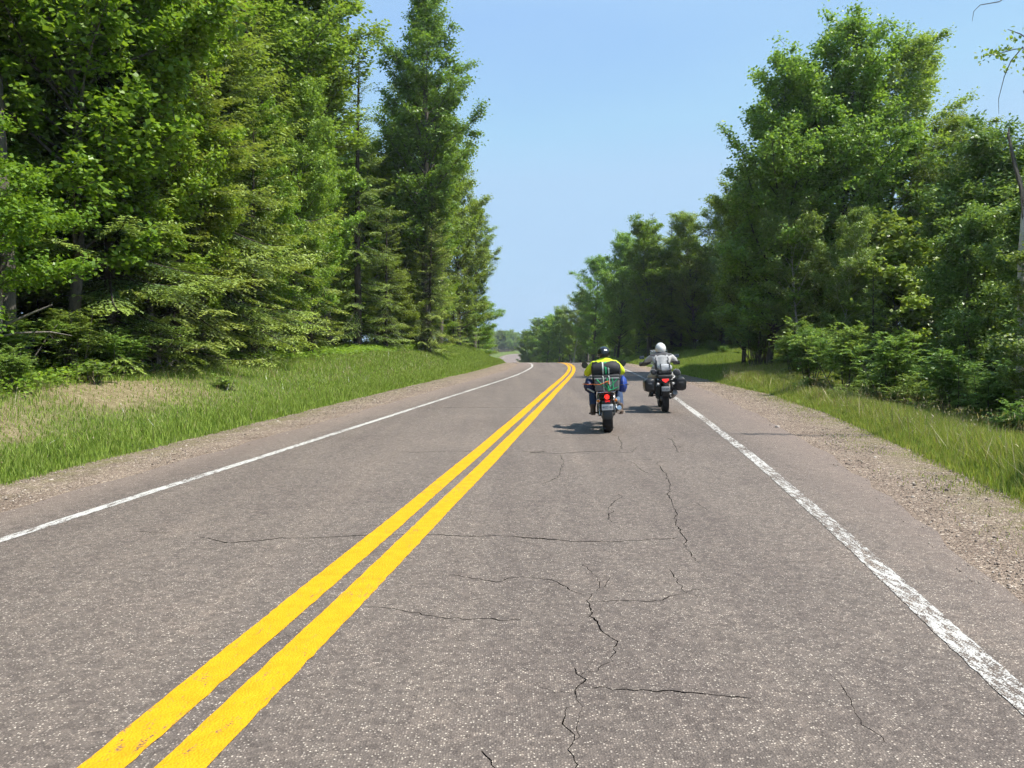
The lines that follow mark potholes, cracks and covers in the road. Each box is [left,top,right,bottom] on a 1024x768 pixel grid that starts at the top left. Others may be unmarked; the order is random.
crack [380,607,517,621]
crack [140,531,674,543]
crack [524,435,698,562]
crack [458,565,751,768]
